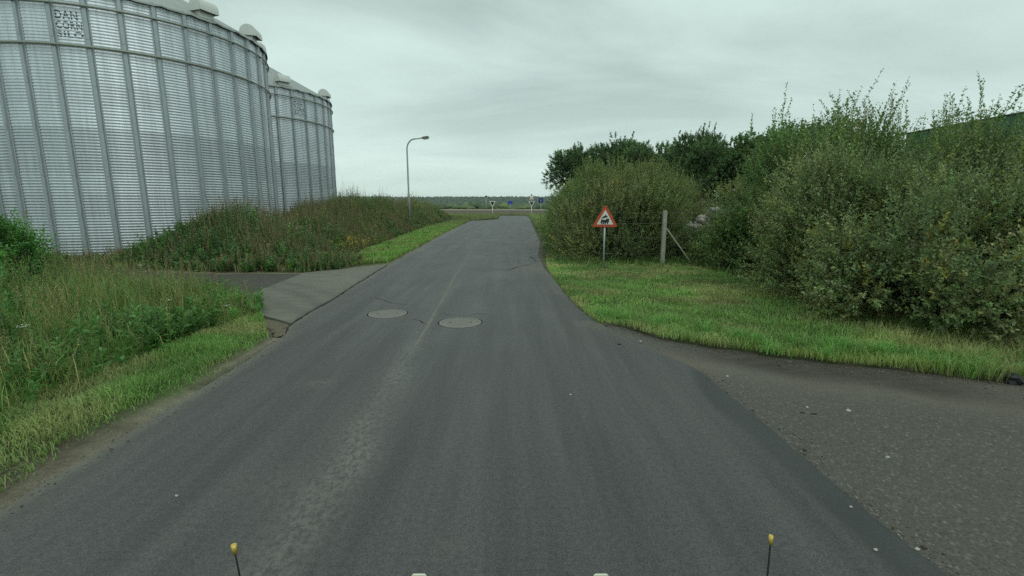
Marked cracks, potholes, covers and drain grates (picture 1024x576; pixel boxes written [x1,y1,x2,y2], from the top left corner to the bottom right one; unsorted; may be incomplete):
manhole cover [439,317,481,328]
crack [372,238,480,348]
manhole cover [368,309,407,318]
